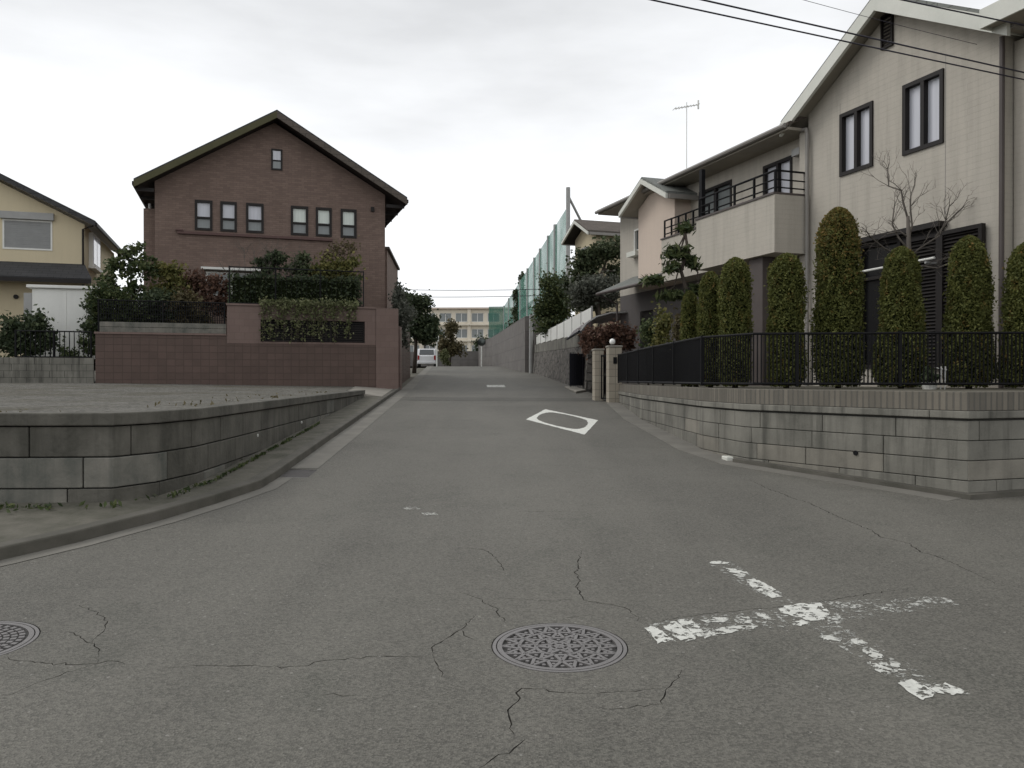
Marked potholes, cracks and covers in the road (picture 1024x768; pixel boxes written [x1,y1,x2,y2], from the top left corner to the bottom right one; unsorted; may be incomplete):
crack [8,604,122,695]
crack [464,551,639,620]
crack [479,672,681,768]
manhole cover [491,623,628,673]
manhole cover [0,621,41,656]
crack [169,617,474,678]
crack [749,479,990,581]
